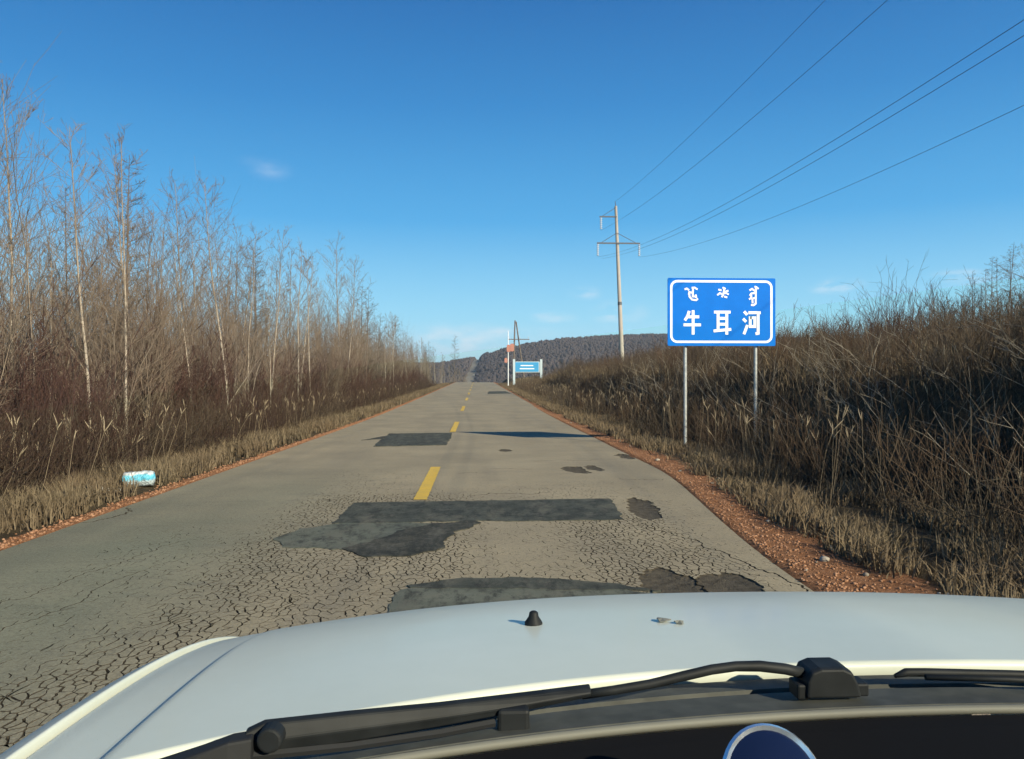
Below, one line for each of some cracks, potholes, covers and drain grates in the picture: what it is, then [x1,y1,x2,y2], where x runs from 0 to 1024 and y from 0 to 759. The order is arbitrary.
crack [0,469,504,754]
crack [493,482,808,592]
